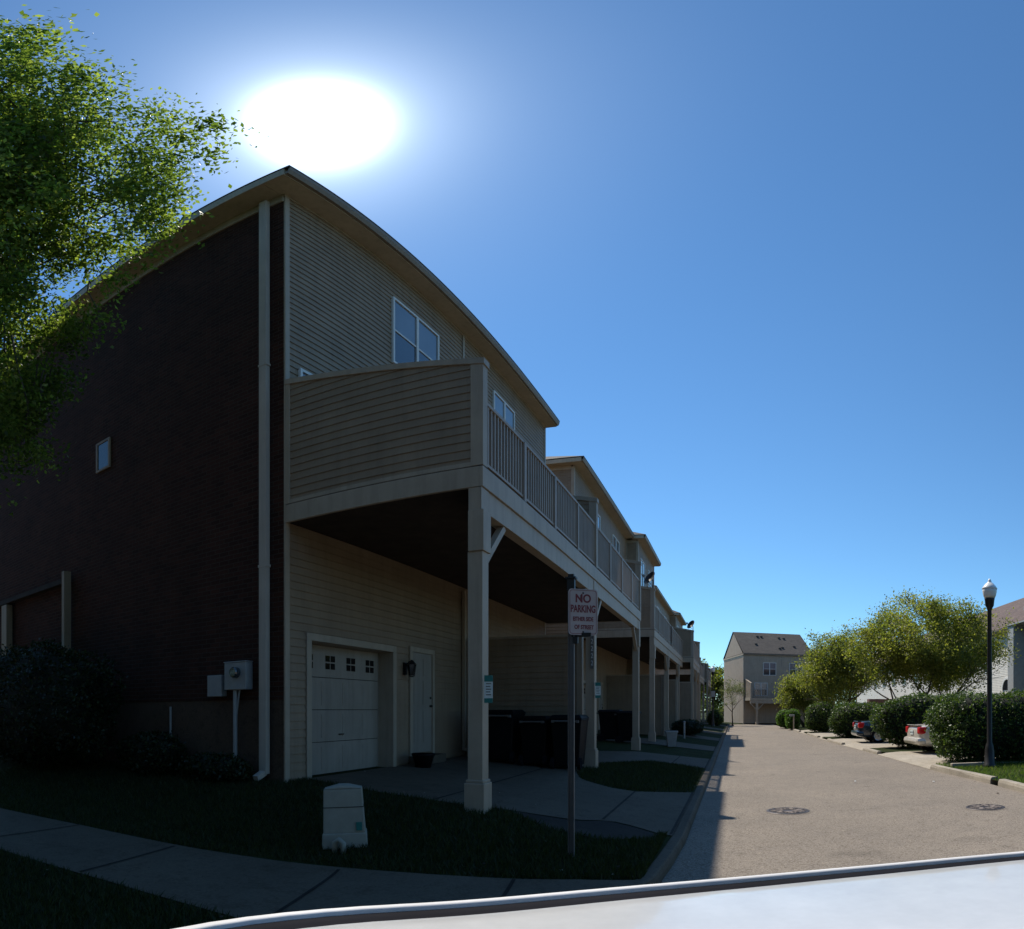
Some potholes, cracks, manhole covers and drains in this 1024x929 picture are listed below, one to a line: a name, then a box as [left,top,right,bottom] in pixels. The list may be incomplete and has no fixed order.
manhole cover [764,807,812,815]
